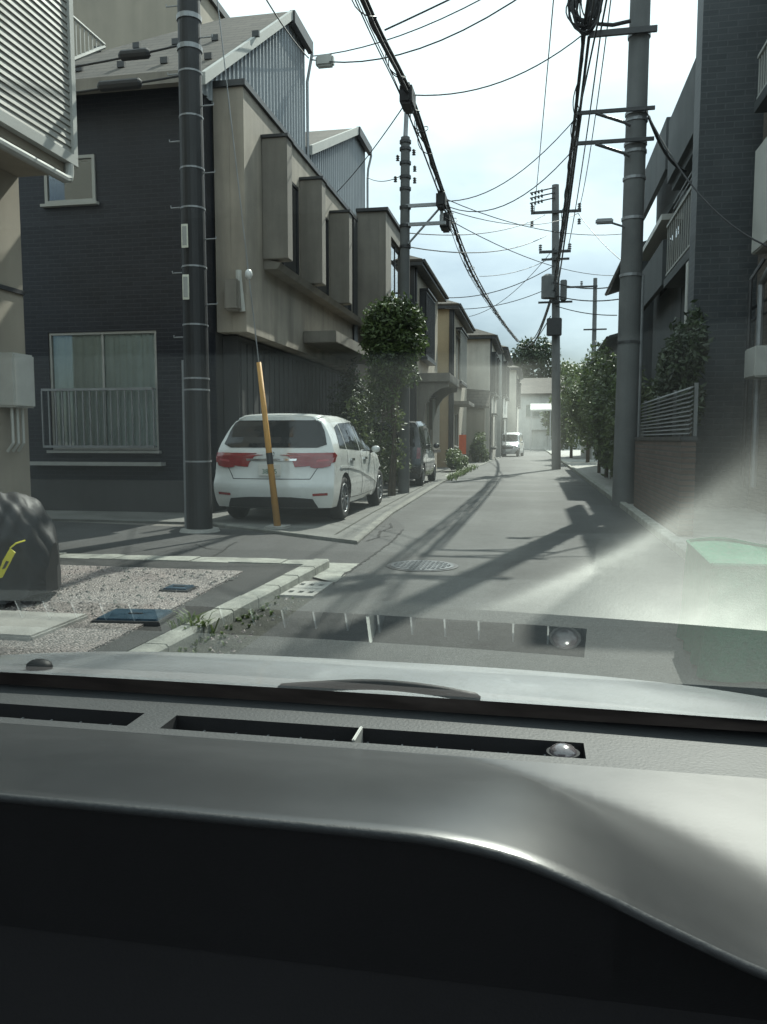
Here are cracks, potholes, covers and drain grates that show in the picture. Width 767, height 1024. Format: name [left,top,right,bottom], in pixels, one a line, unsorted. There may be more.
manhole cover [386,560,458,572]
